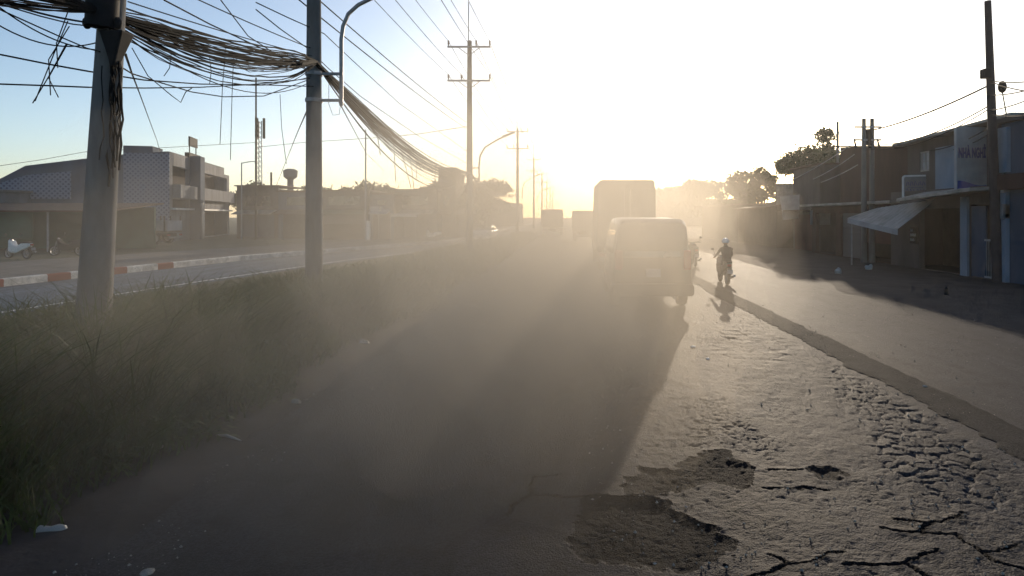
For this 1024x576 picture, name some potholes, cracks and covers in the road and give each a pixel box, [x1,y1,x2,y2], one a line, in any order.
pothole [566,495,739,574]
crack [505,473,669,517]
crack [670,361,1024,576]
pothole [619,449,757,495]
